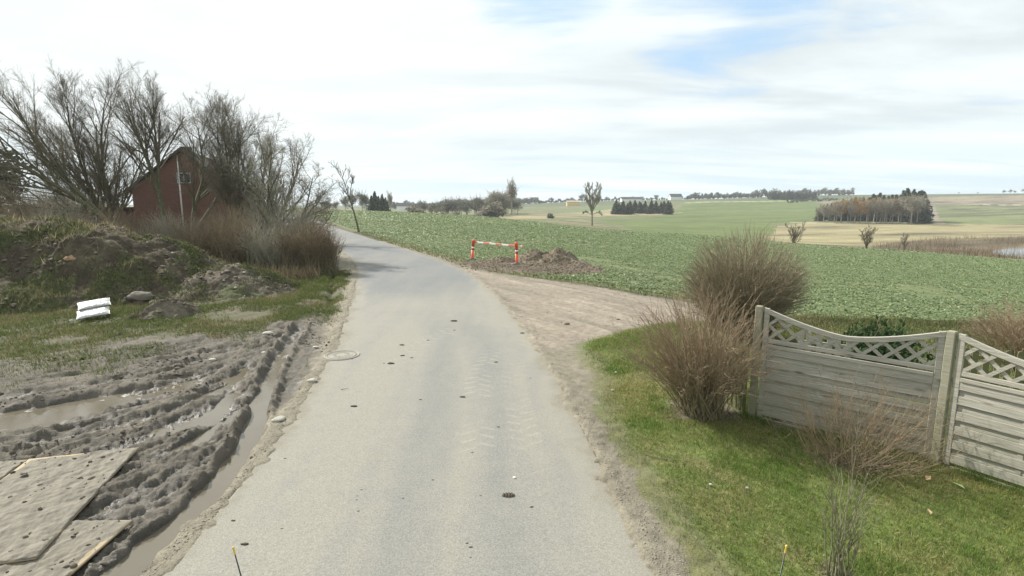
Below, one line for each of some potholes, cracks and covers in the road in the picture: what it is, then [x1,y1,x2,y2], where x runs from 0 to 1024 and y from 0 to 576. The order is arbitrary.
manhole cover [323,350,360,361]
